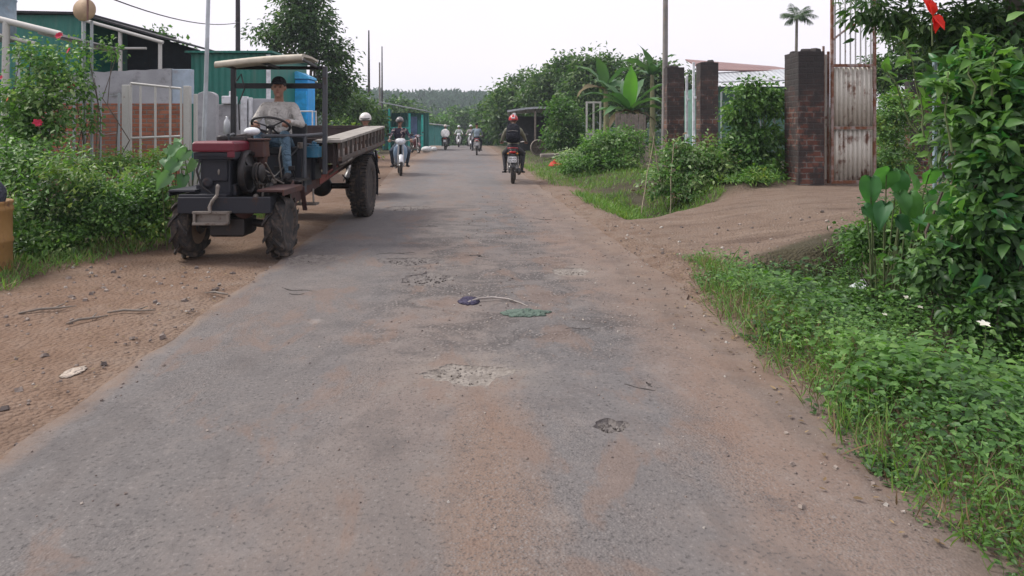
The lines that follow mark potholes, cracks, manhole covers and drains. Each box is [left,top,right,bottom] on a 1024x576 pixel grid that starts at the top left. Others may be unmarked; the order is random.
pothole [419,363,516,387]
pothole [593,418,630,433]
pothole [376,257,445,266]
pothole [401,271,454,286]
